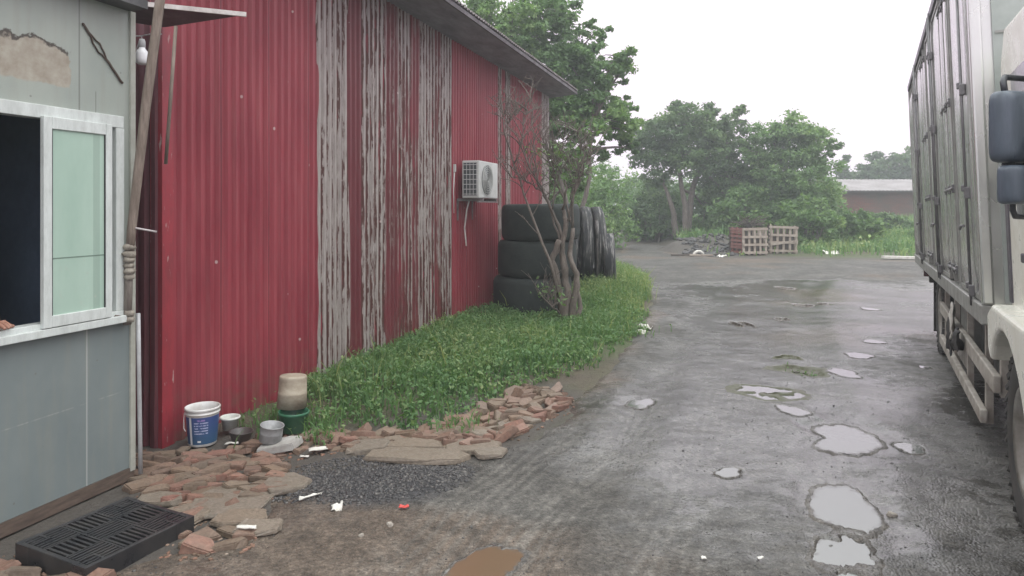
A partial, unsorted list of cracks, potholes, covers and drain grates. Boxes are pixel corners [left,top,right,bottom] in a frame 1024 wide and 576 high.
pothole [825,368,863,379]
pothole [805,528,886,576]
pothole [723,384,812,402]
pothole [624,398,655,410]
pothole [774,404,813,417]
pothole [440,542,532,576]
pothole [804,482,890,543]
pothole [713,467,742,479]
pothole [762,364,831,378]
pothole [810,423,888,458]
pothole [892,442,926,456]
